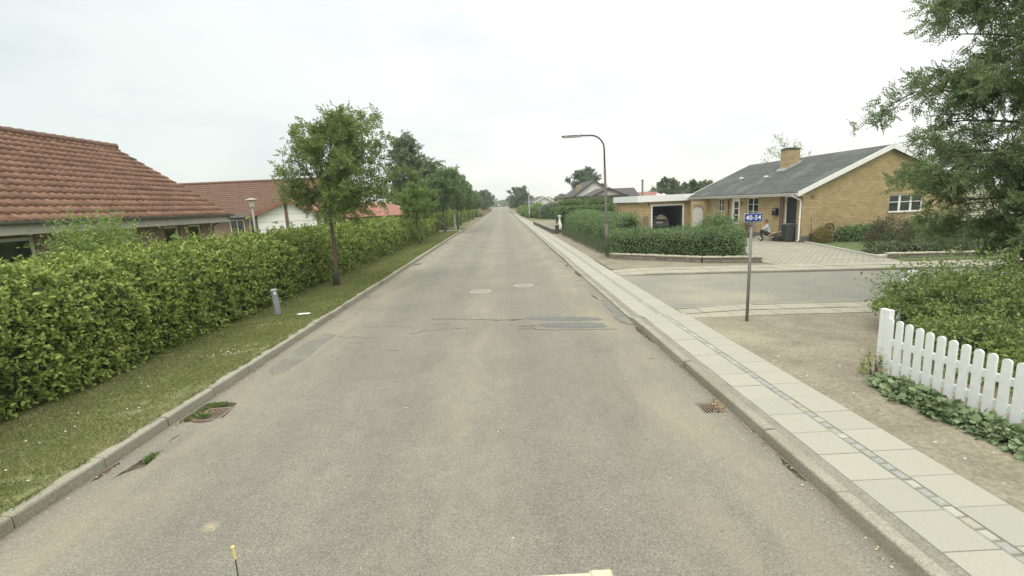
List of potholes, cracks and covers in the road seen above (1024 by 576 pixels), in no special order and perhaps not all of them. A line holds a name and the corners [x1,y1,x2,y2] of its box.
crack [337,319,605,351]
drain grate [695,403,727,414]
pothole [114,451,159,478]
drain grate [192,407,234,423]
